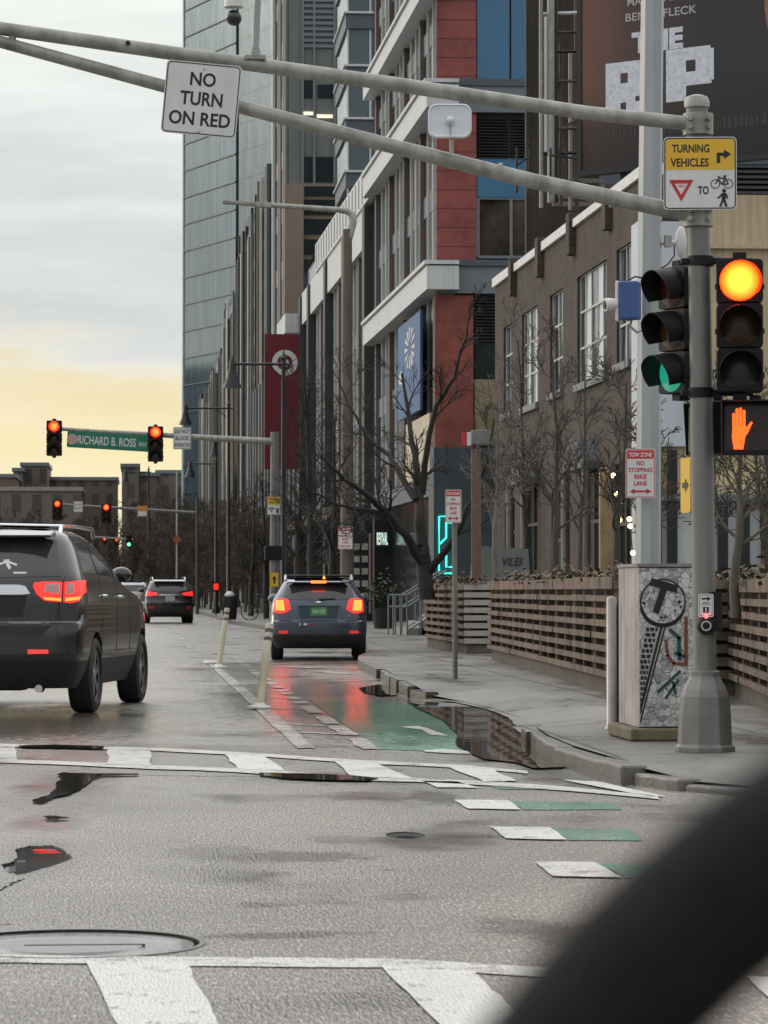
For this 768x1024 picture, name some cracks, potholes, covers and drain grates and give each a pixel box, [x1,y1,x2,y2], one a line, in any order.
pothole [1,845,72,875]
manhole cover [0,929,206,958]
